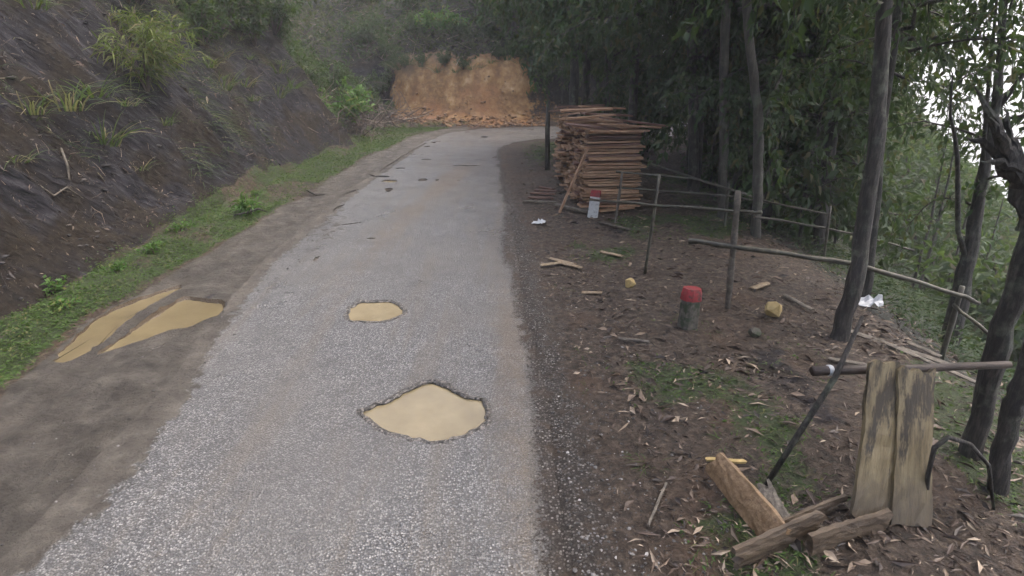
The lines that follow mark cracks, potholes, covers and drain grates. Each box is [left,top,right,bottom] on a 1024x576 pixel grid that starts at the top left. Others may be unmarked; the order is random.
pothole [356,378,493,445]
pothole [52,285,182,362]
pothole [97,296,225,355]
pothole [343,299,408,323]
